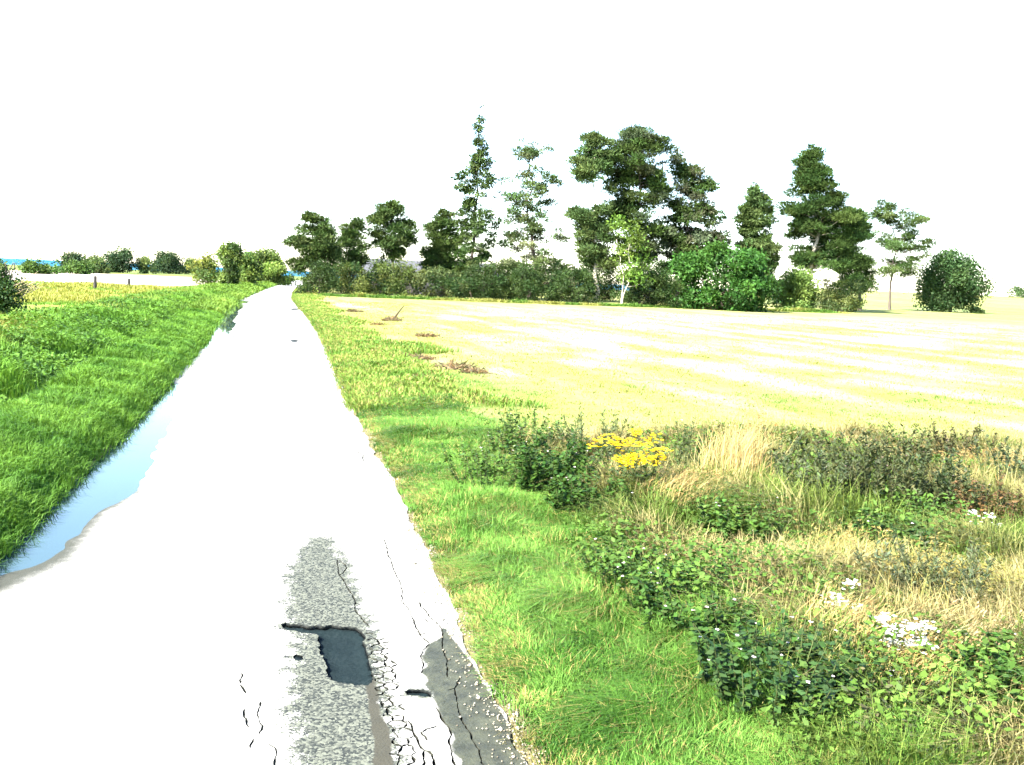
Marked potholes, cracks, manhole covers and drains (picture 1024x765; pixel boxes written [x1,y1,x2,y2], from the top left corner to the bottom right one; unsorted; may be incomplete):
crack [239,660,277,765]
crack [336,540,484,765]
pothole [404,689,432,697]
pothole [281,622,374,686]
